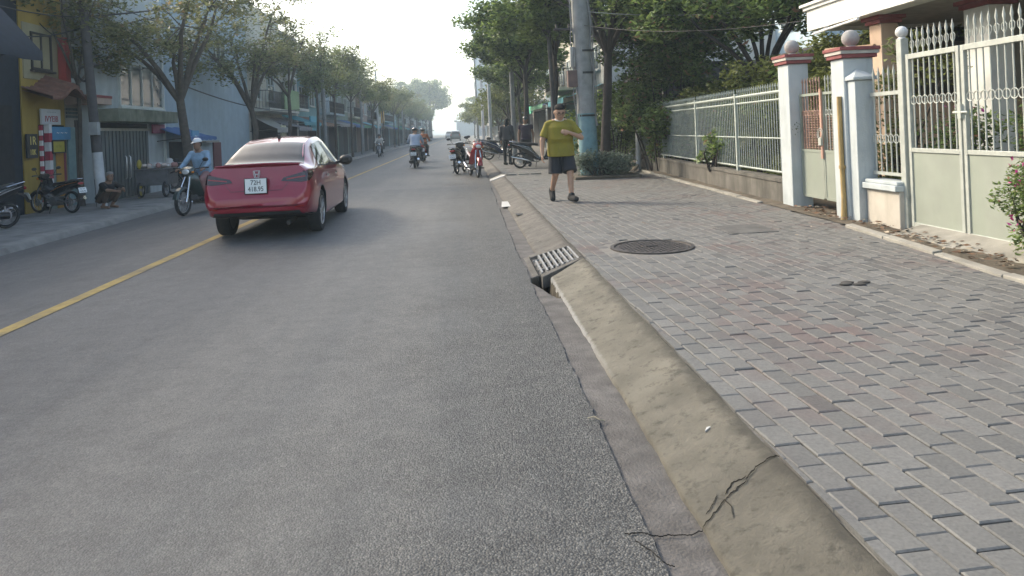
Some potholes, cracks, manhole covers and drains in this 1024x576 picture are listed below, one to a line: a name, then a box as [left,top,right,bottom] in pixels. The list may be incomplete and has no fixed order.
crack [624,455,779,567]
manhole cover [599,239,704,258]
drain grate [523,243,584,289]
